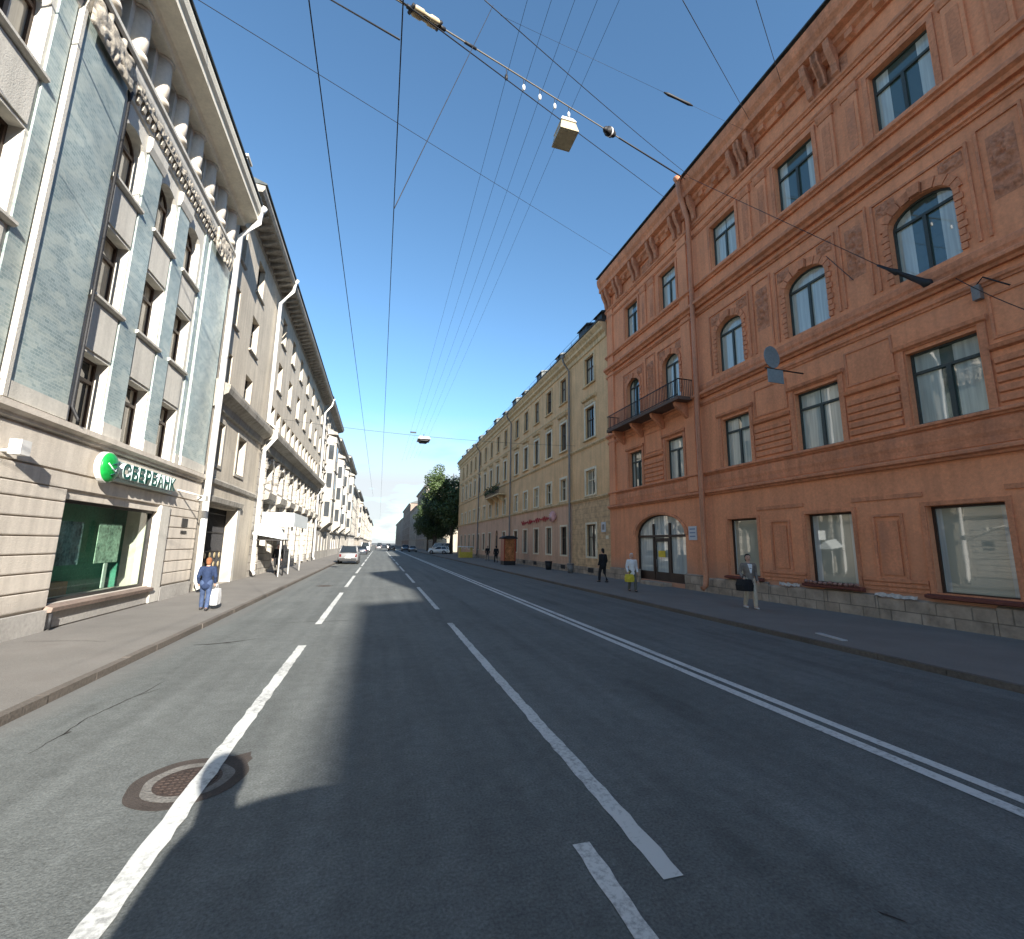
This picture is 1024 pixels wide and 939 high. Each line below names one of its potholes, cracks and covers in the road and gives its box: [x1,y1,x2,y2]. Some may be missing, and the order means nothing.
crack [28,682,162,754]
manhole cover [122,752,252,811]
